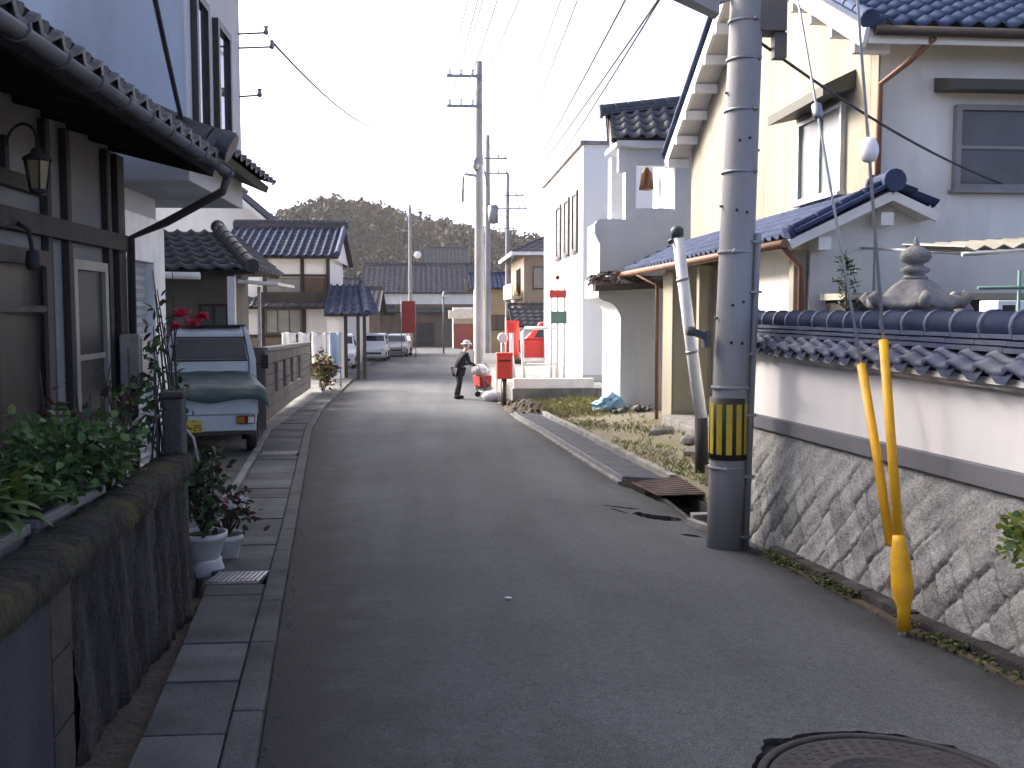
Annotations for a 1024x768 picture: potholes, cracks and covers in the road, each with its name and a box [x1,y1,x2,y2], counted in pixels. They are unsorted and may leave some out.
manhole cover [757,733,1001,768]
drain grate [204,571,270,588]
pothole [633,512,682,521]
